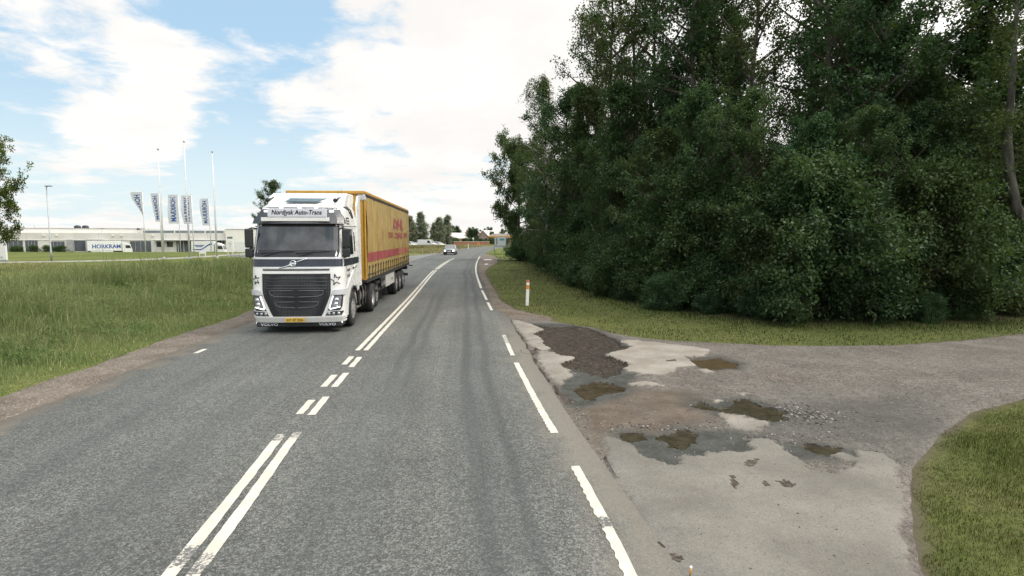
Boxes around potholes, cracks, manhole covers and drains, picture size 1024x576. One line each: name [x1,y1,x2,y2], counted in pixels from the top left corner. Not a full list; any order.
pothole [573,381,626,401]
pothole [655,430,699,450]
pothole [689,356,742,370]
pothole [802,443,844,456]
pothole [691,398,790,422]
